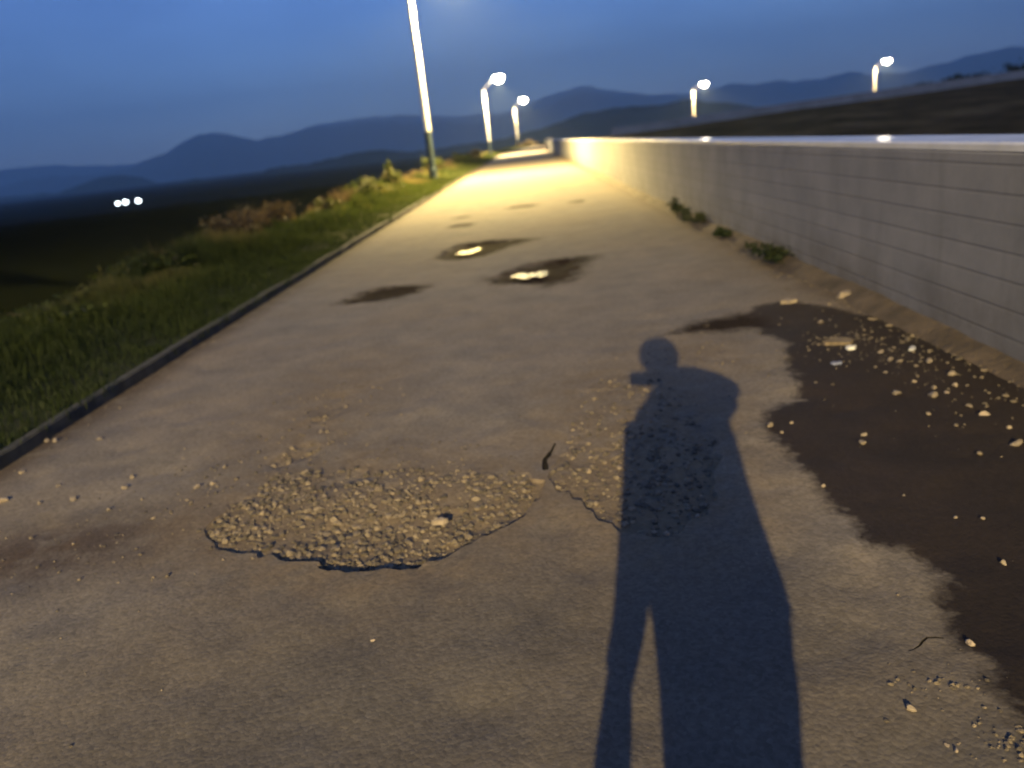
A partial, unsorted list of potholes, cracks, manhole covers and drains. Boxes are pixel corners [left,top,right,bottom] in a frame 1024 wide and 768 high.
pothole [483,258,583,285]
pothole [547,374,724,537]
pothole [204,459,546,573]
crack [909,637,944,651]
pothole [433,238,522,259]
pothole [340,286,419,306]
